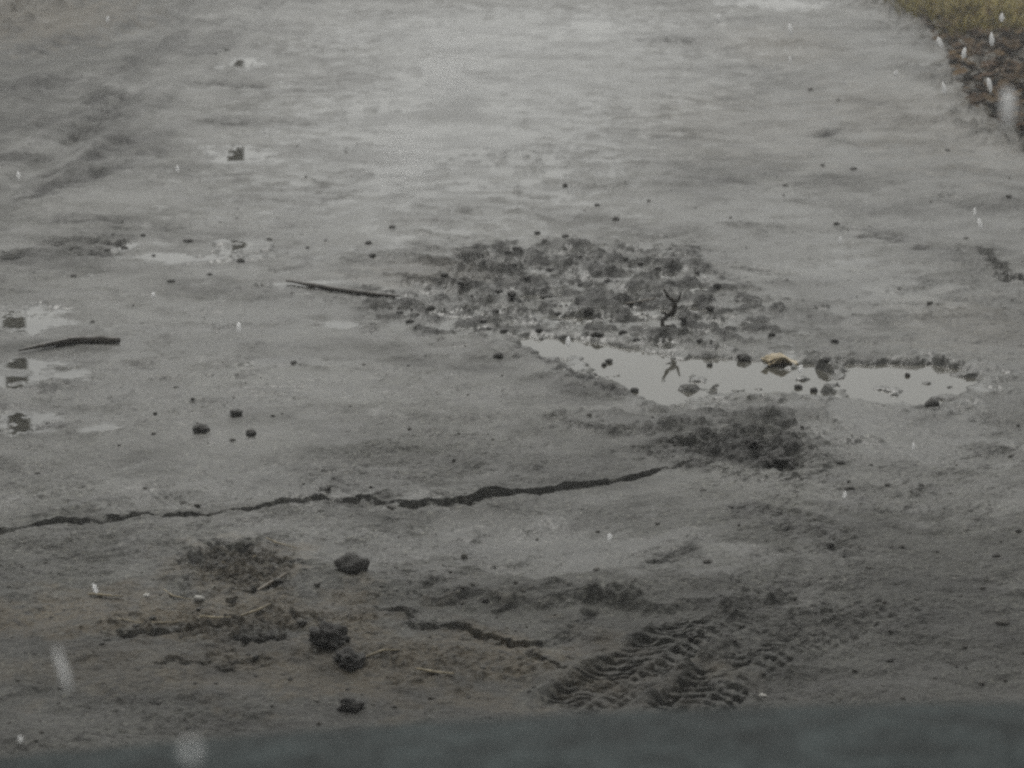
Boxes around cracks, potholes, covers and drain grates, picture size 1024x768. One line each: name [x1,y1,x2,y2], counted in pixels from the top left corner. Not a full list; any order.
pothole [355,236,790,347]
crack [505,631,566,661]
